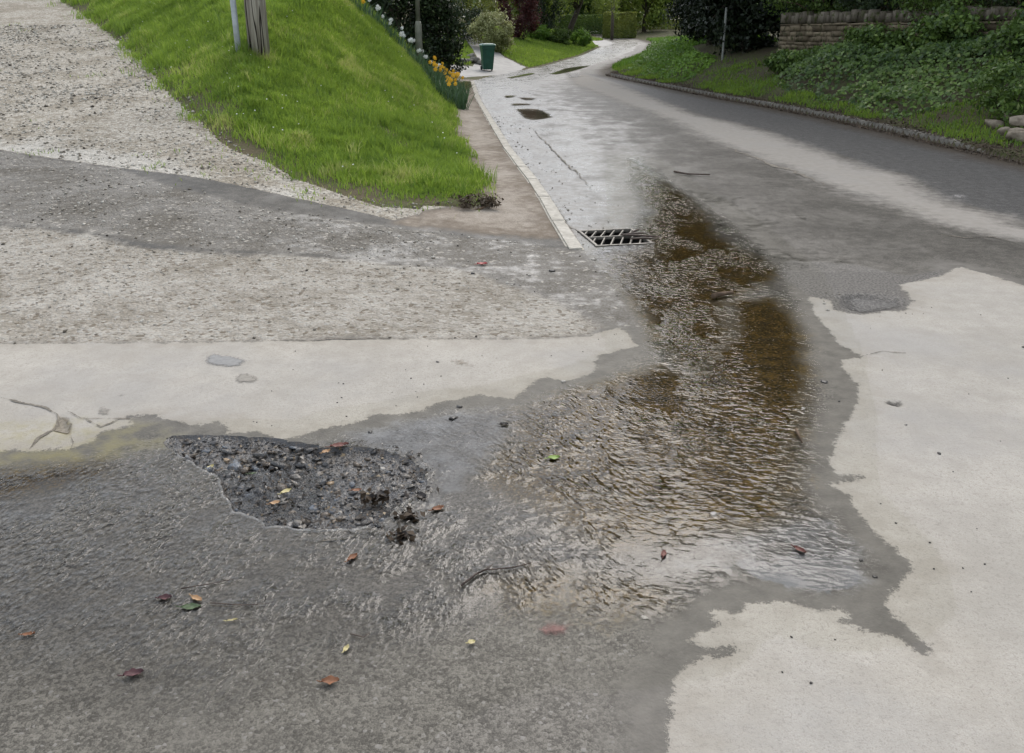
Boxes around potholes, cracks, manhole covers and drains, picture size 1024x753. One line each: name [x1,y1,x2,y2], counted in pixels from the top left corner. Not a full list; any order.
pothole [163,435,427,532]
drain grate [577,228,655,247]
crack [9,399,132,449]
